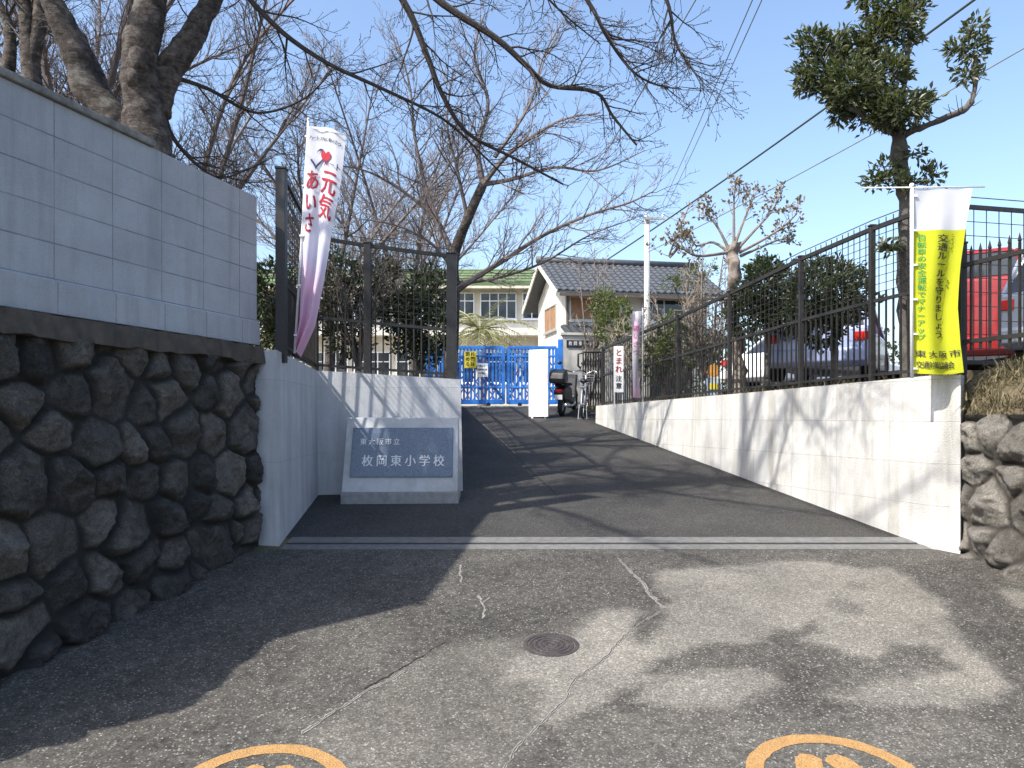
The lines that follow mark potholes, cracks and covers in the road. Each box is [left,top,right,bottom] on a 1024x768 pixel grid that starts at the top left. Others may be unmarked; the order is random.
crack [459,557,666,768]
manhole cover [523,633,579,657]
crack [301,641,446,735]
